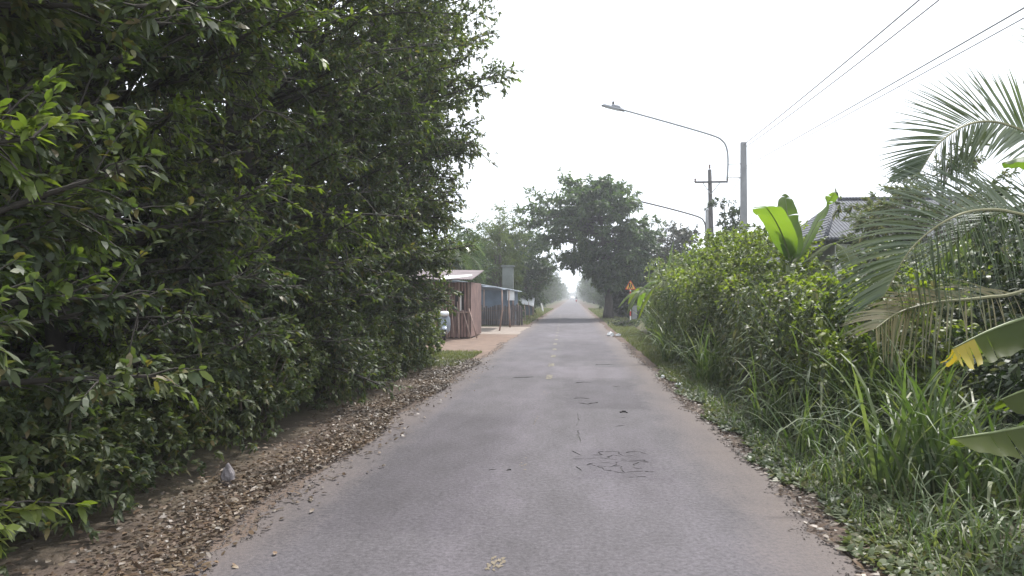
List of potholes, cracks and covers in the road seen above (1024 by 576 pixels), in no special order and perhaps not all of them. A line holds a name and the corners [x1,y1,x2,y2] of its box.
crack [573,382,655,477]
